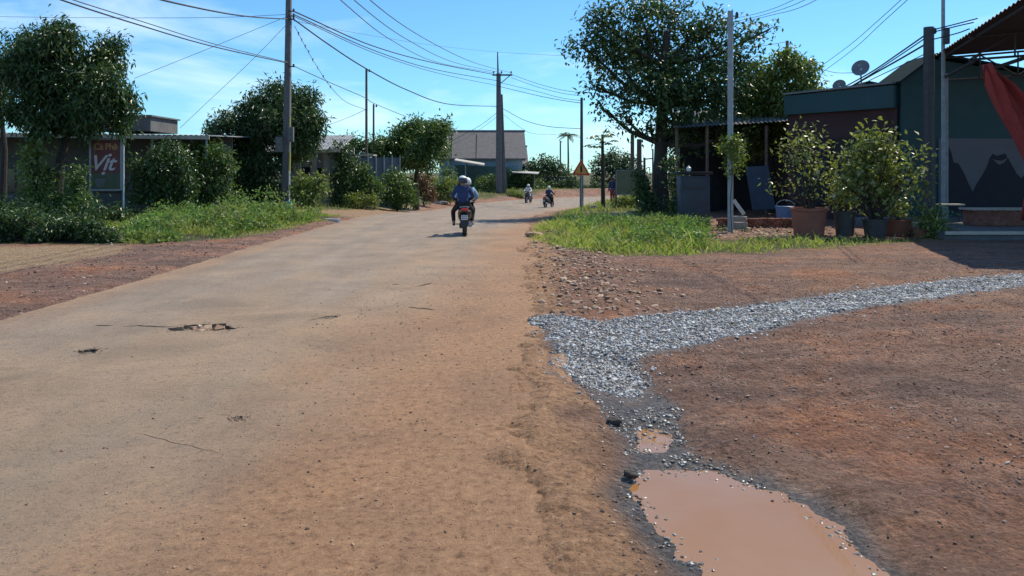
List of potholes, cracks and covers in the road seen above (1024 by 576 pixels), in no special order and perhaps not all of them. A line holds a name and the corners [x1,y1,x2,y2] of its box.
crack [144,434,220,454]
pothole [167,323,237,331]
